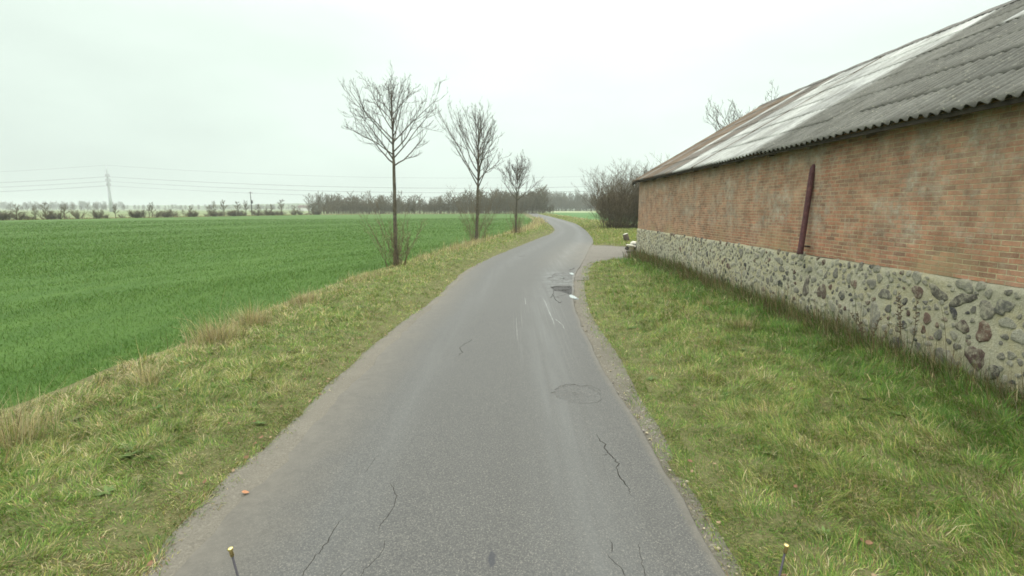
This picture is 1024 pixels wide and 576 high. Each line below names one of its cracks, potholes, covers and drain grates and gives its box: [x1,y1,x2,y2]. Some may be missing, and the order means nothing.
crack [597,435,636,499]
pothole [550,286,572,294]
crack [303,485,397,576]
